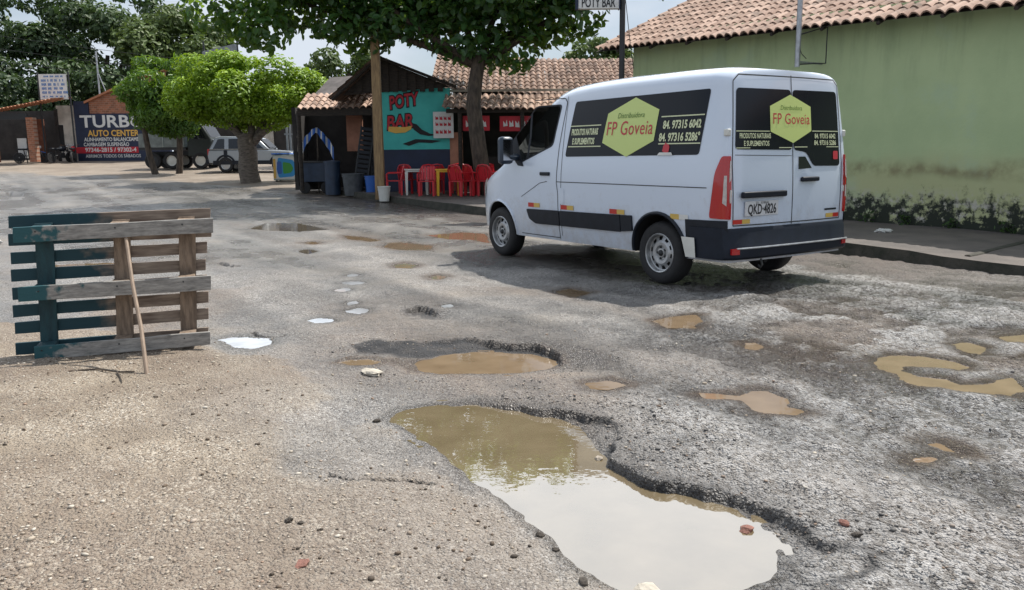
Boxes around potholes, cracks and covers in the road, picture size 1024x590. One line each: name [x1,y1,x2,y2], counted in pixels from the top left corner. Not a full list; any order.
pothole [943,338,1000,356]
pothole [691,385,820,418]
pothole [576,375,637,392]
pothole [247,222,332,232]
pothole [646,312,711,331]
pothole [732,338,776,353]
pothole [864,350,1024,399]
pothole [905,433,990,460]
pothole [349,337,568,382]
pothole [406,305,440,320]
pothole [378,241,438,251]
pothole [364,400,897,590]
